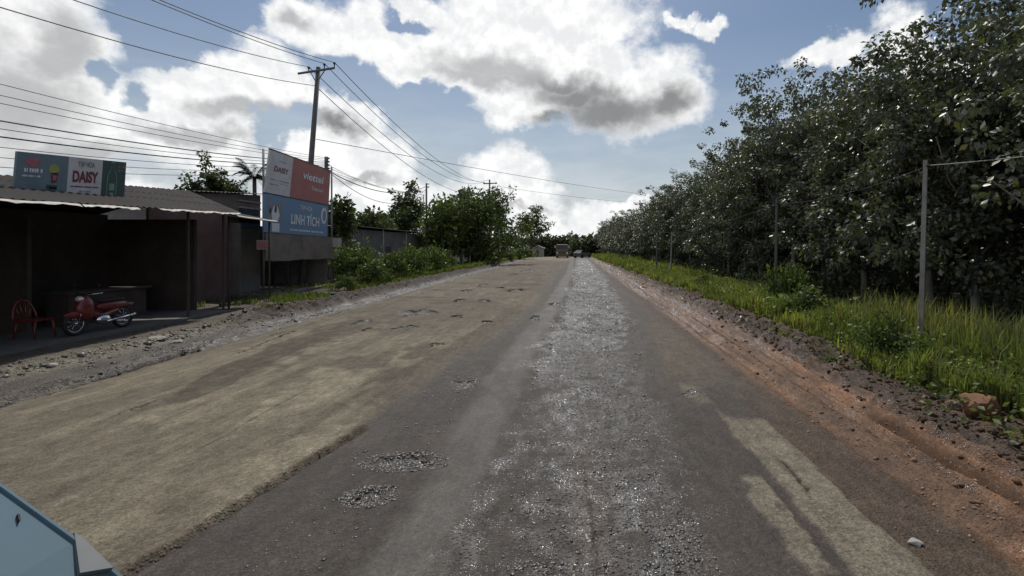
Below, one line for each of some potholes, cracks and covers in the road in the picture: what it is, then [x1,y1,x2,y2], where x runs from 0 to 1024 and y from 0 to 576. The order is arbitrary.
pothole [347,318,375,327]
pothole [337,484,399,509]
pothole [388,324,422,332]
pothole [370,450,444,472]
pothole [446,379,481,392]
pothole [389,308,441,318]
pothole [678,388,708,399]
